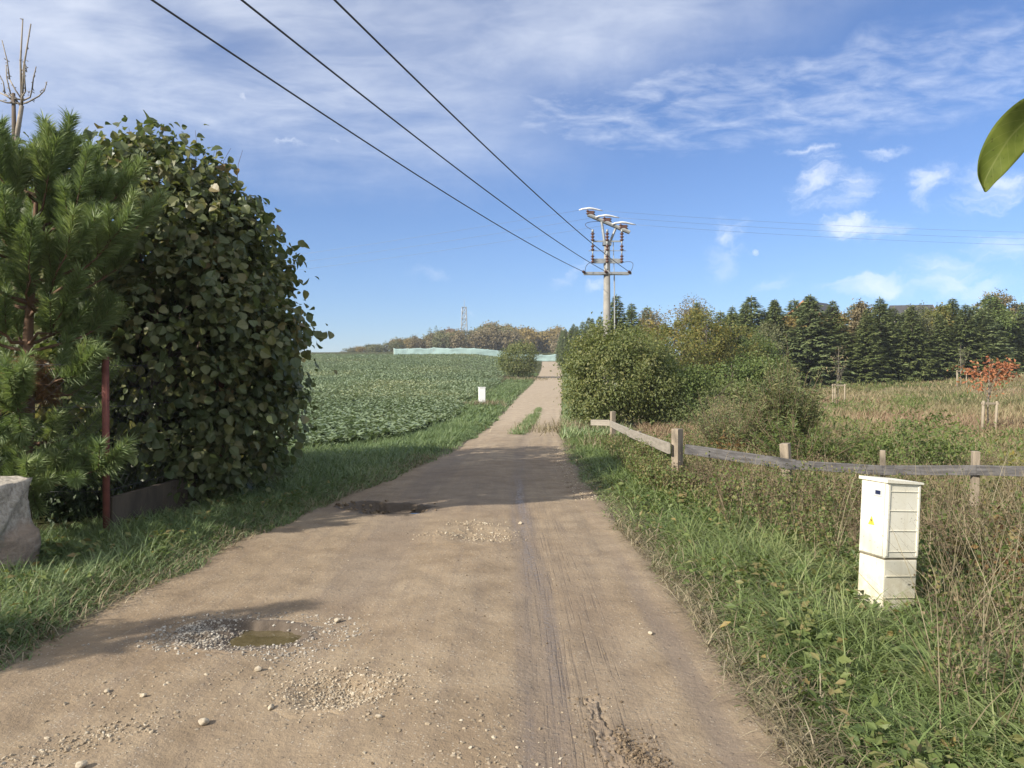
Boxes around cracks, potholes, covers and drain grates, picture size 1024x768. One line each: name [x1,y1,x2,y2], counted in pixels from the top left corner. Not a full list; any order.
pothole [329,499,442,516]
pothole [81,609,381,666]
